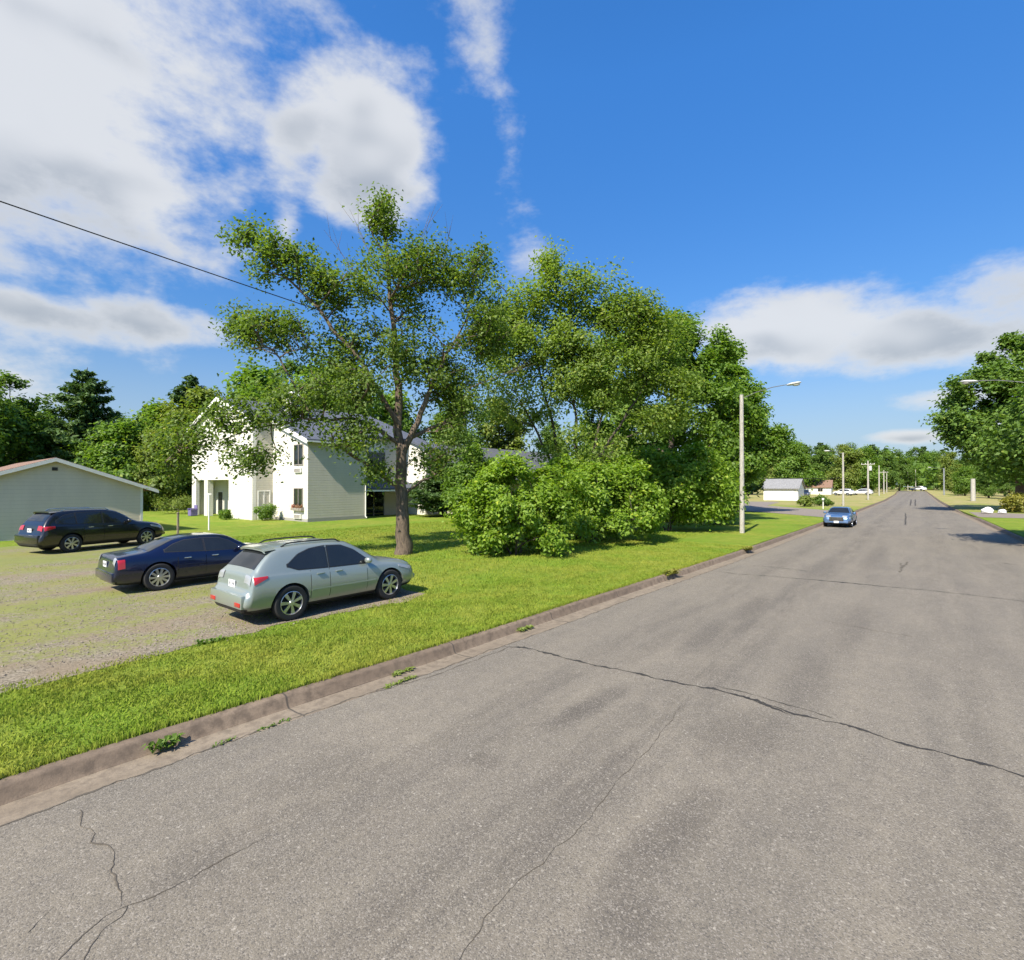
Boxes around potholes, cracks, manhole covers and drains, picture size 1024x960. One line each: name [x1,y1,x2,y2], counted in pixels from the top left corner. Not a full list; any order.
crack [459,707,680,960]
crack [33,810,264,960]
